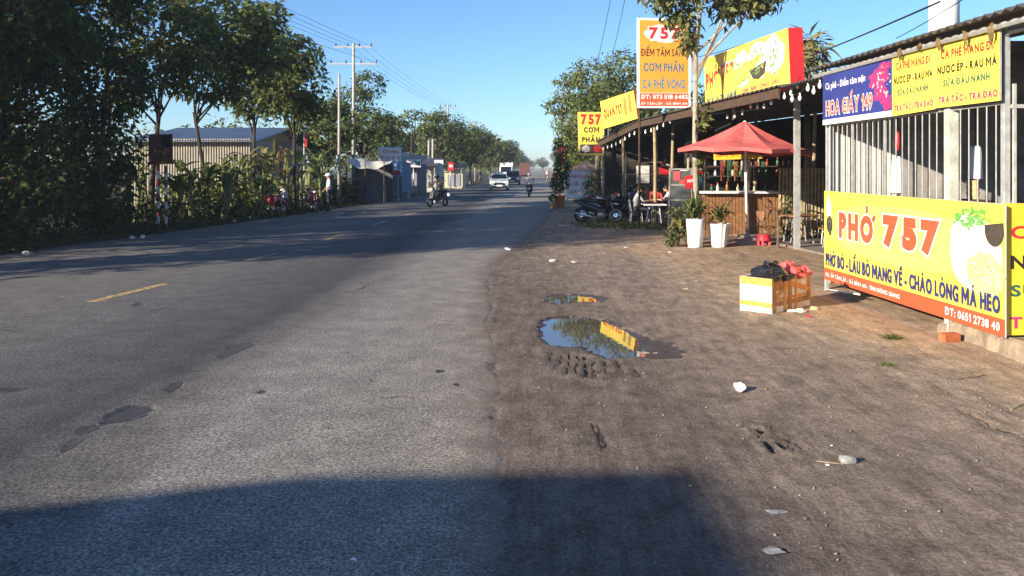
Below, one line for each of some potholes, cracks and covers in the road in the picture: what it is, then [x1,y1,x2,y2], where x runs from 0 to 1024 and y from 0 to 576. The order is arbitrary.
pothole [543,293,611,305]
pothole [537,315,687,359]
